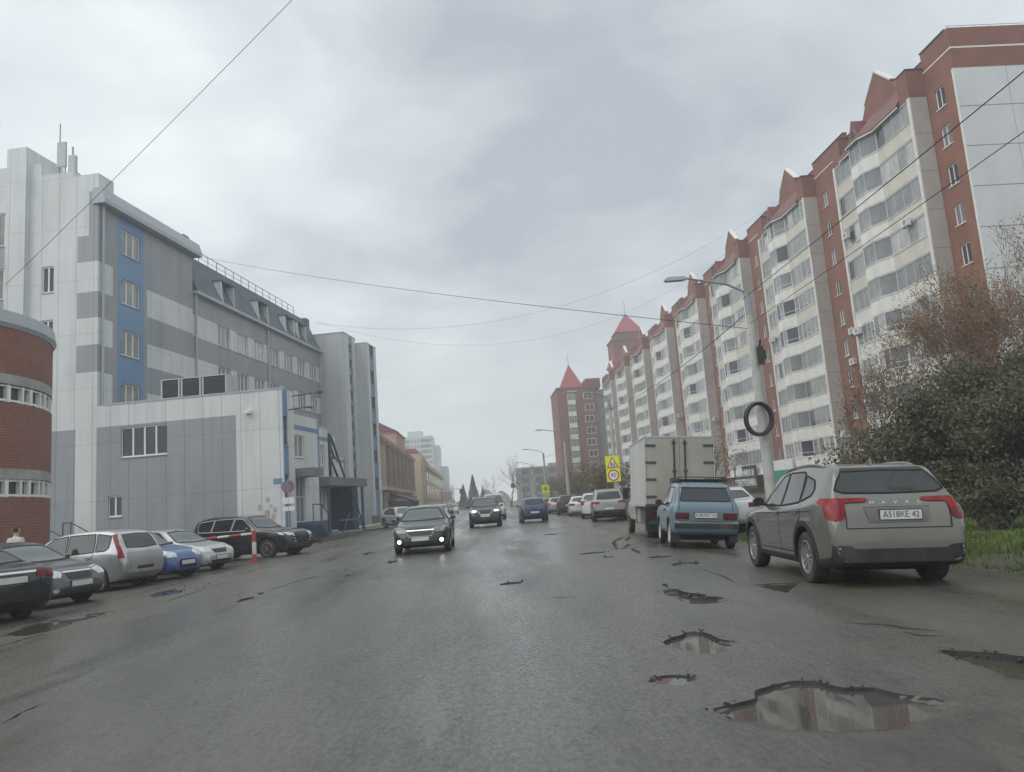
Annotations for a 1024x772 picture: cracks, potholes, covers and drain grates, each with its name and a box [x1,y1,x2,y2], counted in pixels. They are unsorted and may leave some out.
pothole [705,677,965,735]
pothole [0,610,116,638]
pothole [755,582,801,593]
pothole [933,647,1024,681]
pothole [647,673,696,686]
pothole [663,628,742,654]
crack [611,536,645,554]
pothole [661,589,728,605]
